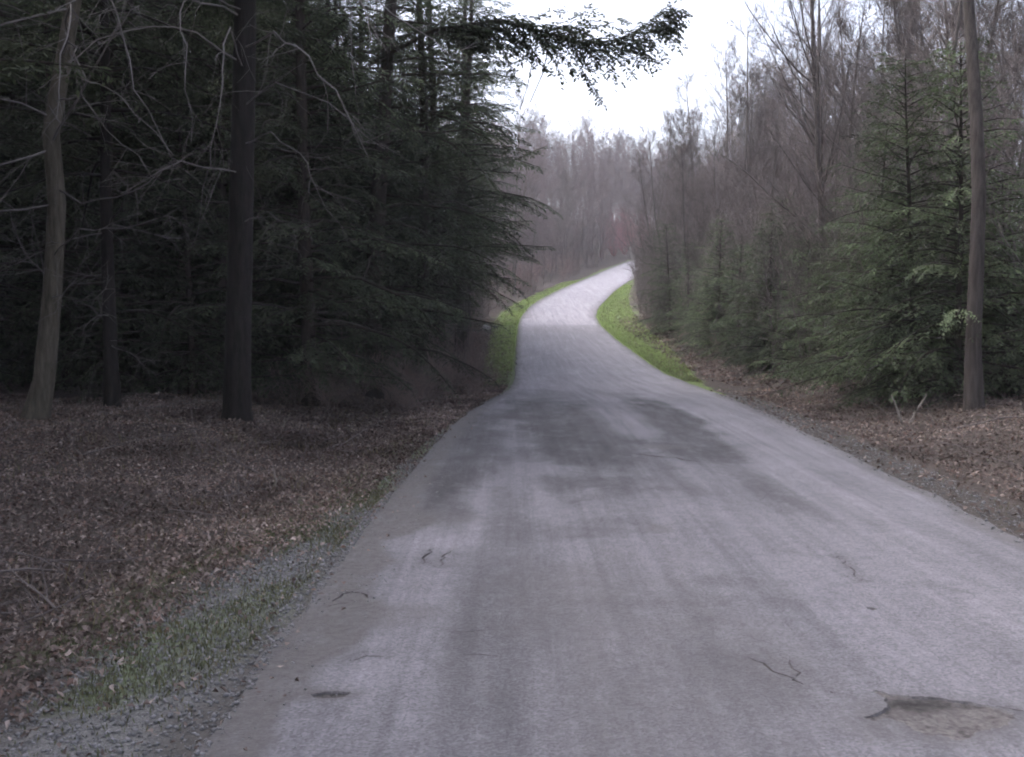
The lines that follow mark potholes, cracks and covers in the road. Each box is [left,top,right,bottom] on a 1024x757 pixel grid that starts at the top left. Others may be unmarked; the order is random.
crack [750,658,835,694]
pothole [864,689,1016,740]
